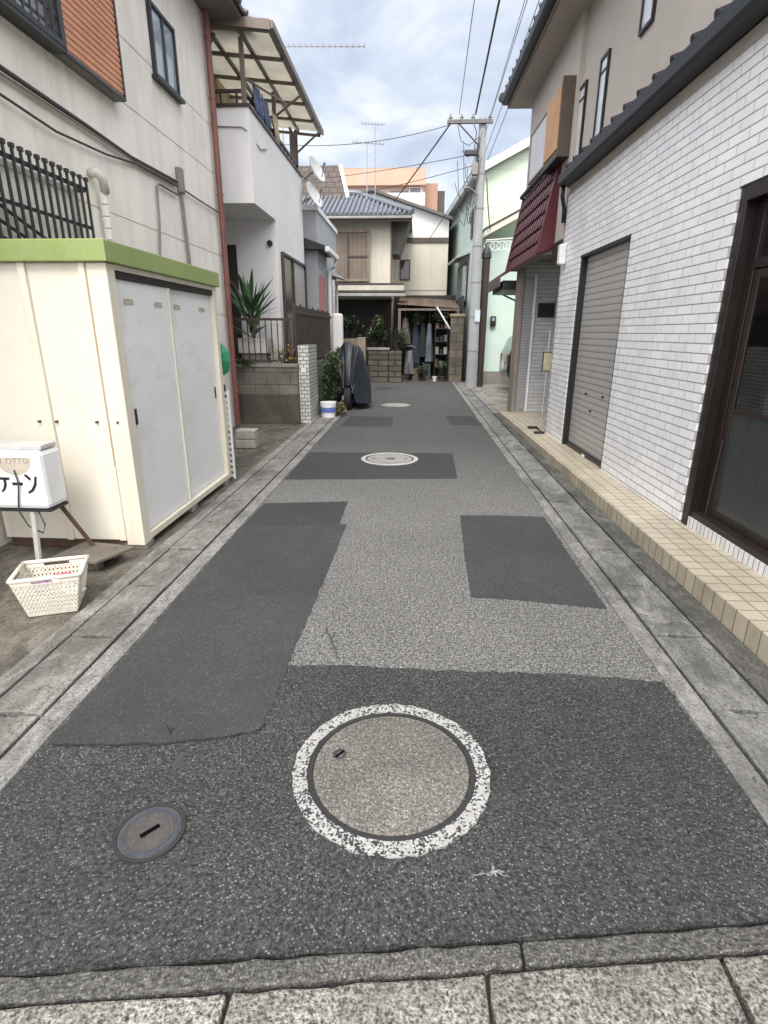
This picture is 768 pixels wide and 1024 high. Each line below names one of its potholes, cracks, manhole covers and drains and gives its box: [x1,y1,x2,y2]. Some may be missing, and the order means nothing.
crack [325,627,339,660]
manhole cover [292,704,491,859]
manhole cover [361,453,418,466]
